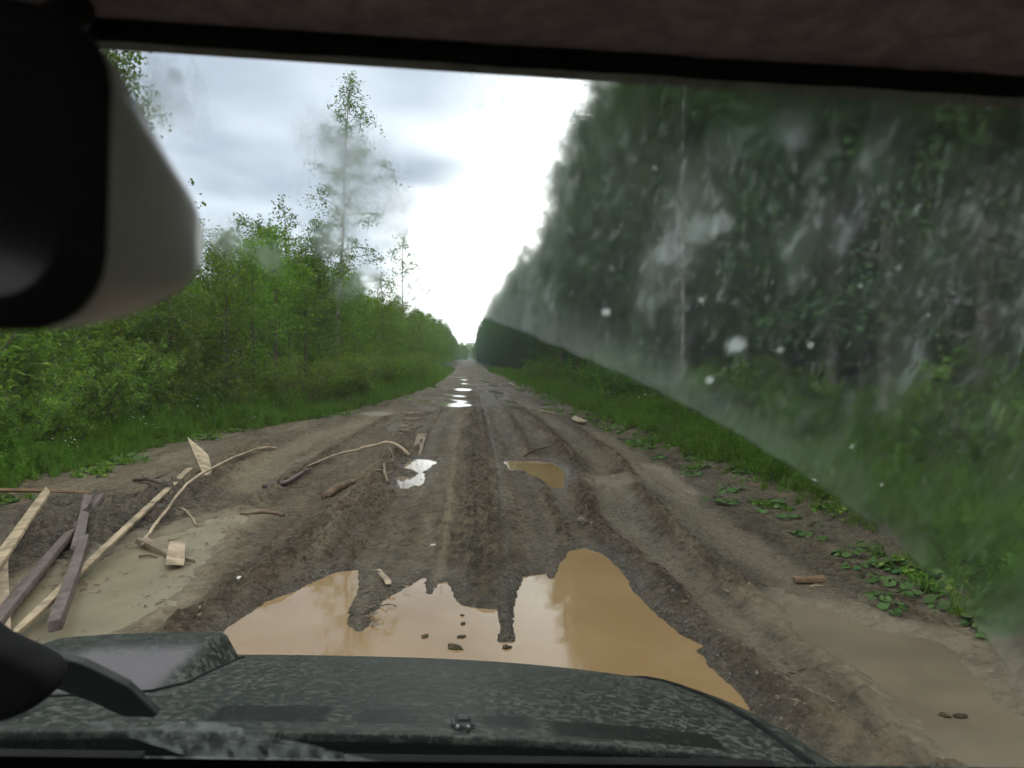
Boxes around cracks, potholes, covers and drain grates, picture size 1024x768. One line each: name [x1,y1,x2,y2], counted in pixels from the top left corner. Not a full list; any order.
pothole [197,539,808,744]
pothole [388,454,444,489]
pothole [432,398,475,407]
pothole [496,455,575,488]
